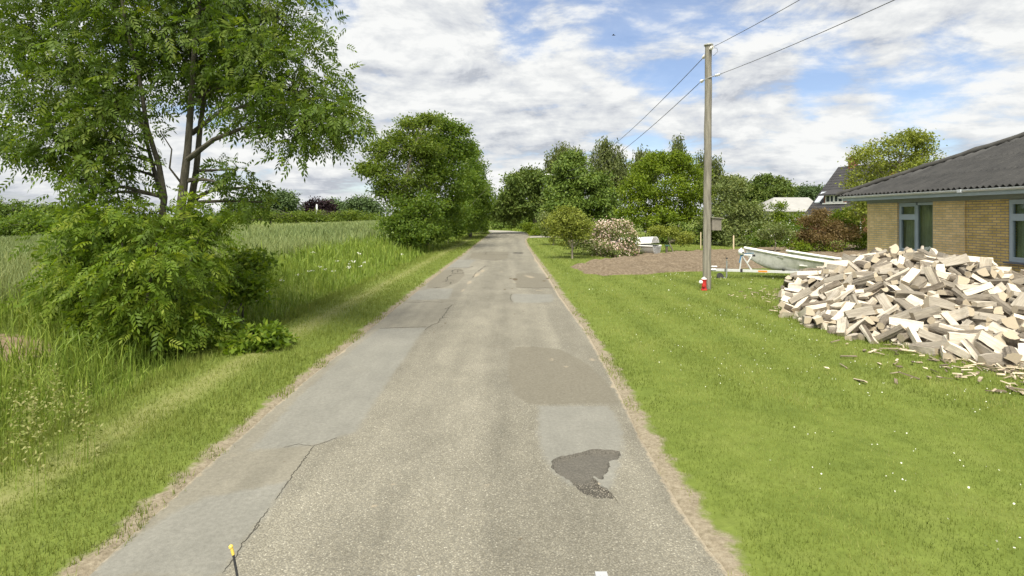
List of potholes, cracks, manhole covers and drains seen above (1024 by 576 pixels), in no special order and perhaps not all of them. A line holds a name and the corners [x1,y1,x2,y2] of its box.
crack [222,438,335,573]
pothole [551,449,621,499]
